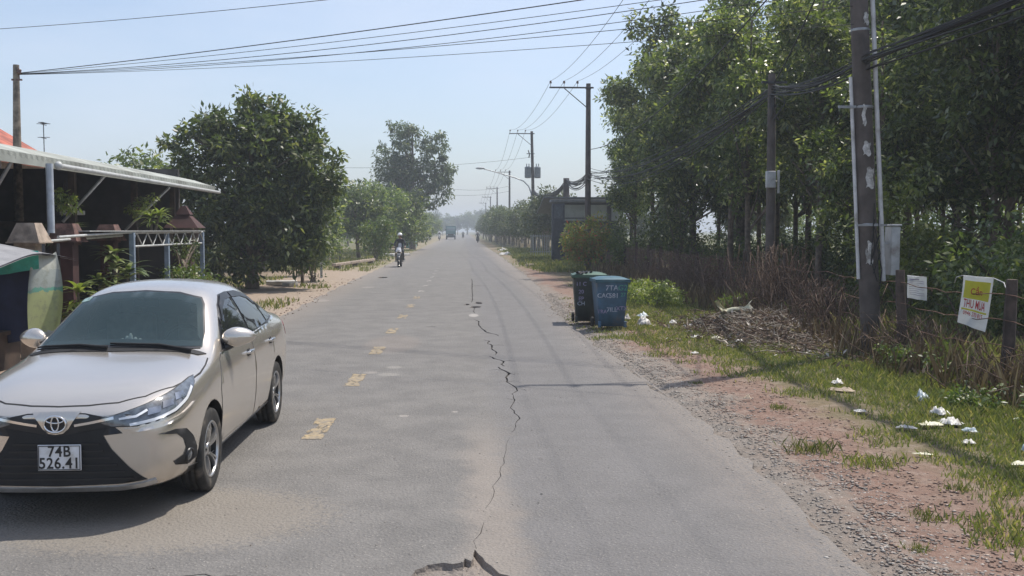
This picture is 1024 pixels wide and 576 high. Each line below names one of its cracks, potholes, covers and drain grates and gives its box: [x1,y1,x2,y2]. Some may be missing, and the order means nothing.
pothole [411,550,508,576]
crack [471,279,525,549]
